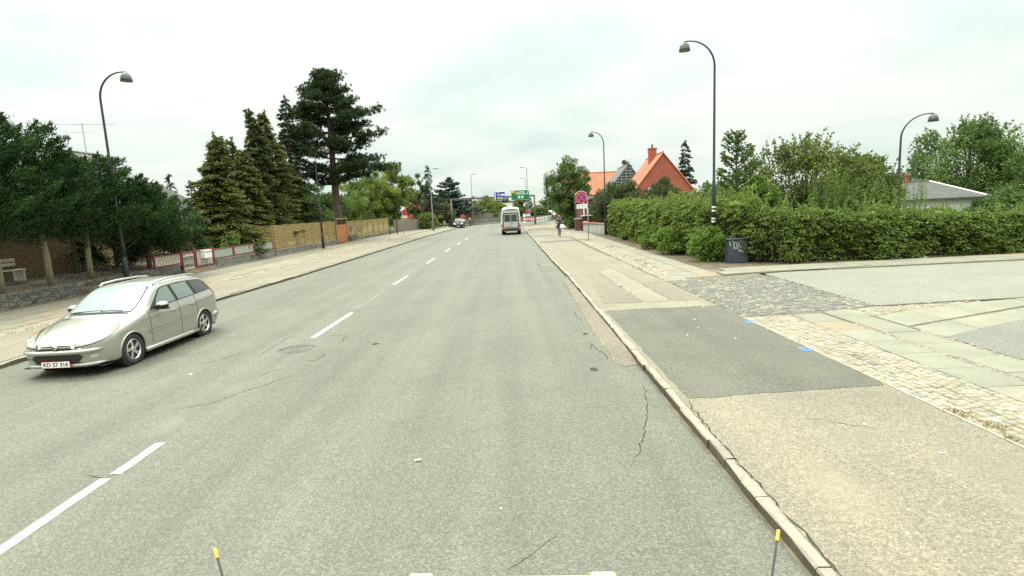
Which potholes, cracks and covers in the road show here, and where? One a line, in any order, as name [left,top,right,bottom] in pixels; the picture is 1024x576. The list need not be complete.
crack [170,338,291,411]
manhole cover [274,344,318,355]
crack [633,386,648,460]
